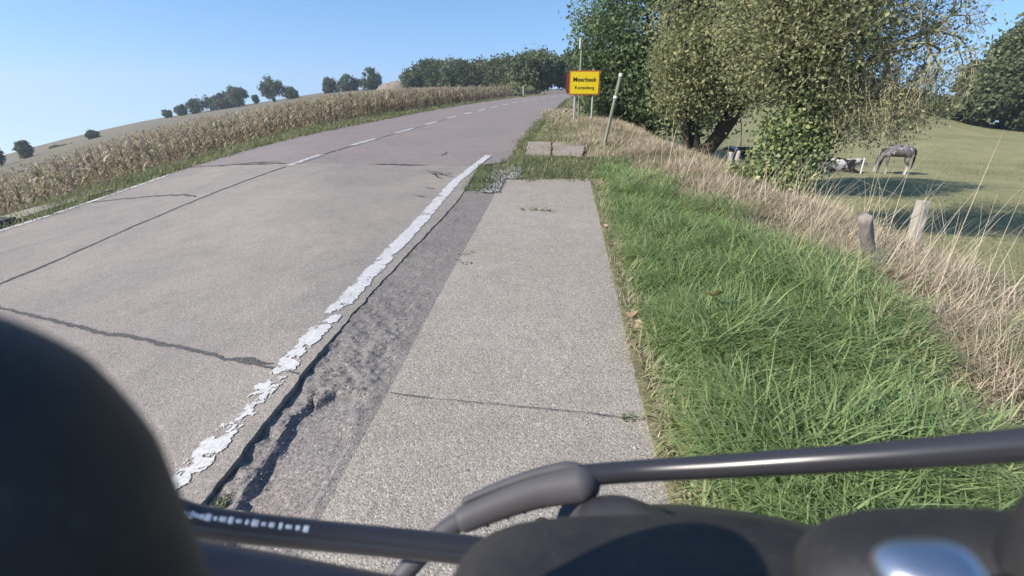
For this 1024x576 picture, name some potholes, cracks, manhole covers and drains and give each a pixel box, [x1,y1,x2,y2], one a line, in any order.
crack [81,194,196,204]
crack [395,152,453,197]
